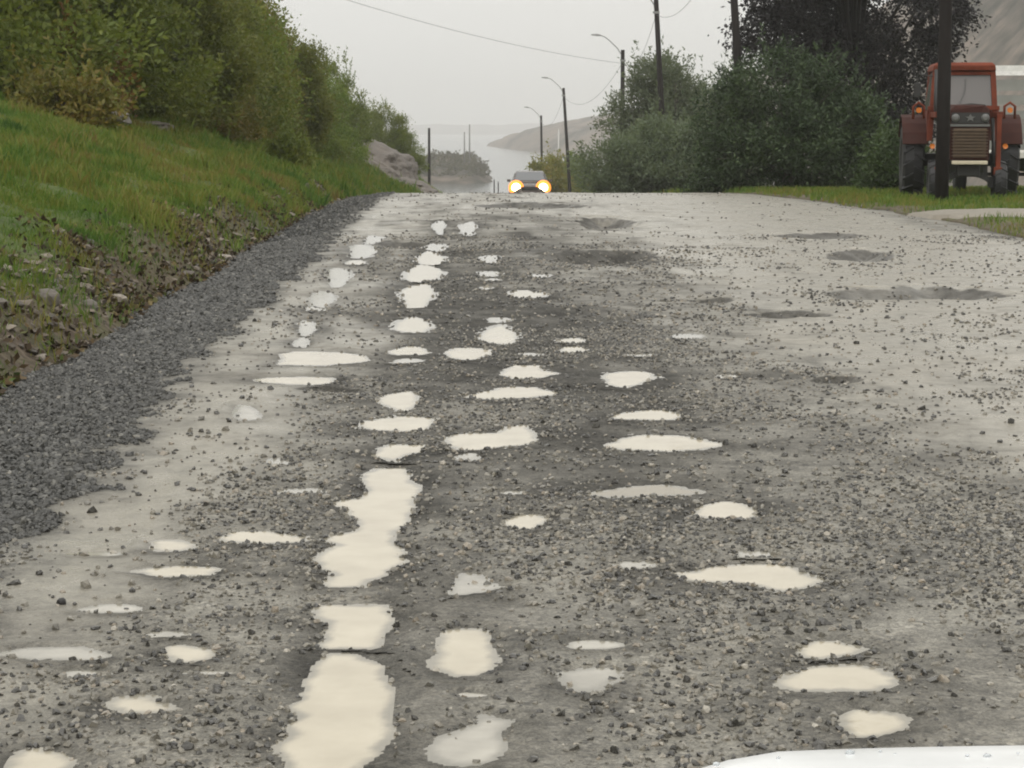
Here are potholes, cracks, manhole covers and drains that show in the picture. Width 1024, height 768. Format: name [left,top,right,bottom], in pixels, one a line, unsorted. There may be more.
pothole [801,697,946,747]
pothole [416,420,568,454]
pothole [398,618,531,684]
pothole [528,658,655,698]
pothole [329,412,465,437]
pothole [396,700,550,768]
pothole [554,479,735,502]
pothole [276,593,431,653]
pothole [660,495,791,523]
pothole [579,369,679,392]
pothole [818,249,901,263]
pothole [188,524,323,548]
